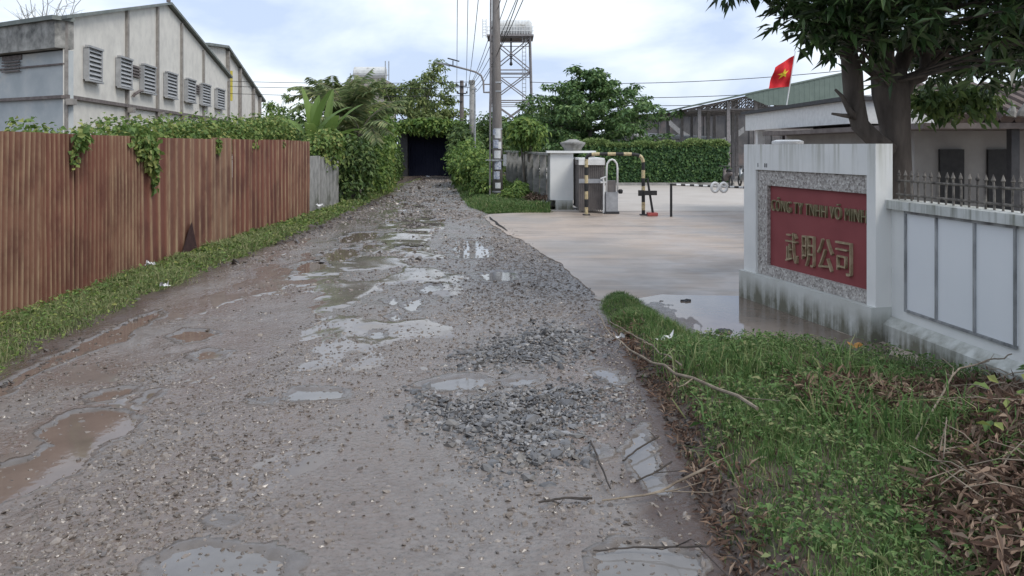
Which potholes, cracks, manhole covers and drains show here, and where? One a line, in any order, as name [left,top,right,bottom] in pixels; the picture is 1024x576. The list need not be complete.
pothole [584,365,628,387]
pothole [162,327,224,345]
pothole [0,406,148,506]
pothole [495,373,553,388]
pothole [137,535,313,576]
pothole [0,308,170,398]
pothole [328,231,388,245]
pothole [348,242,385,250]
pothole [382,310,411,322]
pothole [359,328,389,340]
pothole [407,372,503,393]
pothole [78,385,146,405]
